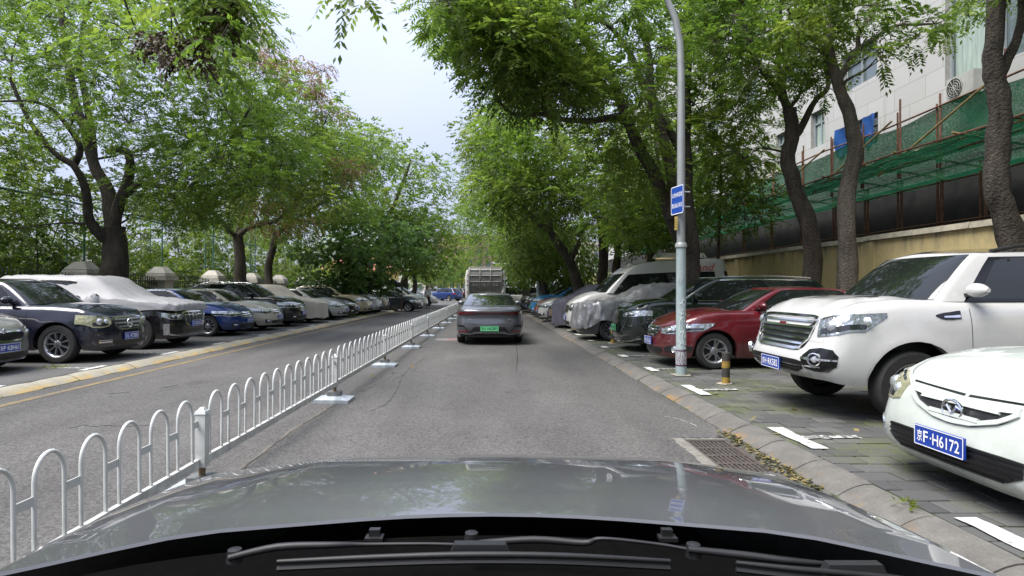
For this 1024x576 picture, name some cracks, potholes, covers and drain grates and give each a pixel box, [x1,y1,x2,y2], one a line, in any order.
drain grate [671,437,777,473]
